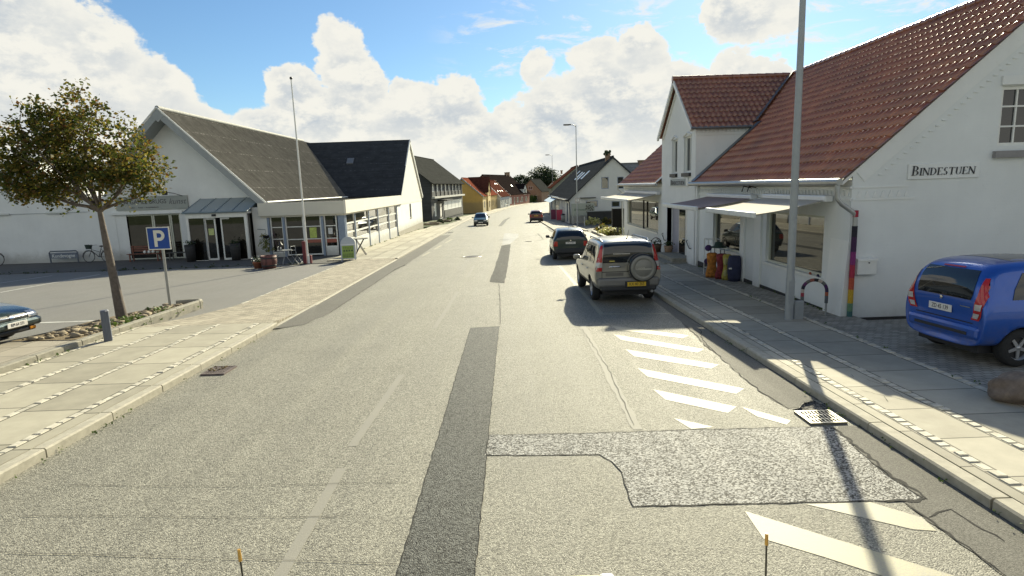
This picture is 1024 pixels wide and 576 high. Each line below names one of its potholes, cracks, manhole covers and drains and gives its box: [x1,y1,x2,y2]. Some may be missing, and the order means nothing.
drain grate [794,410,848,425]
drain grate [200,365,237,376]
